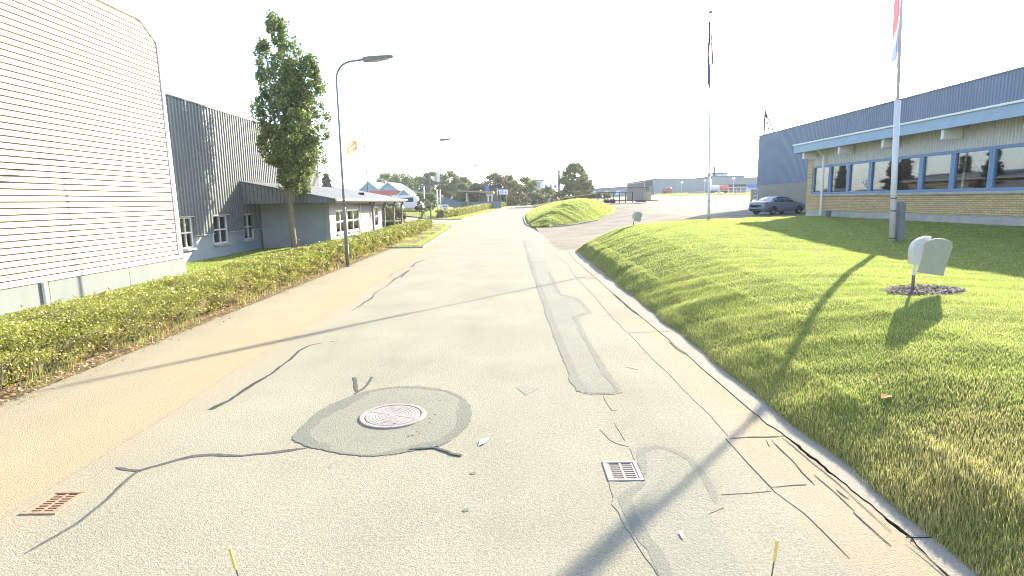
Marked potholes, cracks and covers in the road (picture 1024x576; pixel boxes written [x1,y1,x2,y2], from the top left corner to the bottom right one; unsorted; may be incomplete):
manhole cover [359,403,426,429]
crack [721,435,951,576]
drain grate [602,461,645,481]
drain grate [19,491,89,515]
